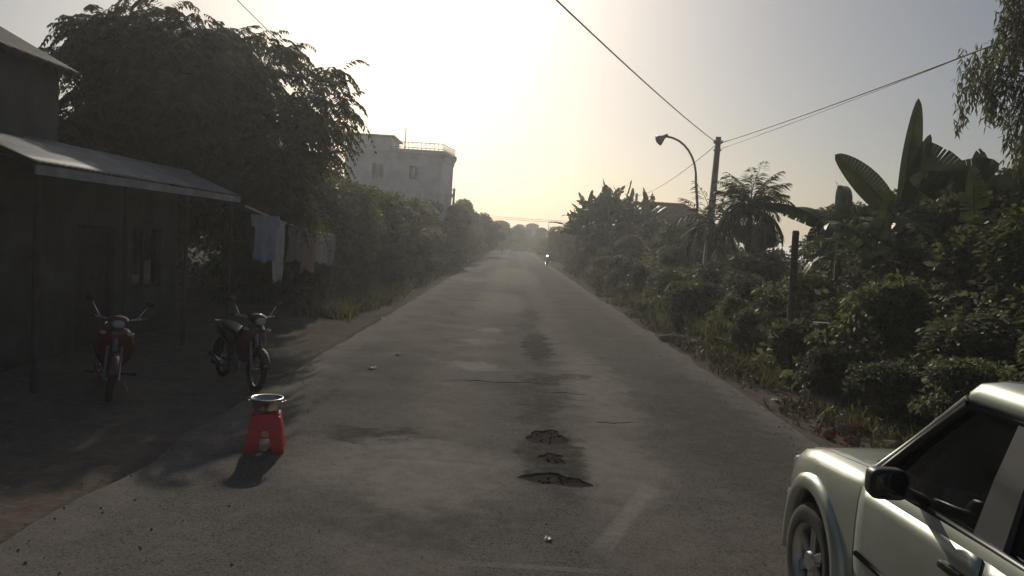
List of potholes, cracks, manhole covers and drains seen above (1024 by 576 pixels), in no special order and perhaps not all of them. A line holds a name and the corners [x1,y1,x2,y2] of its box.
pothole [526,429,569,445]
pothole [537,453,566,465]
pothole [517,472,594,488]
